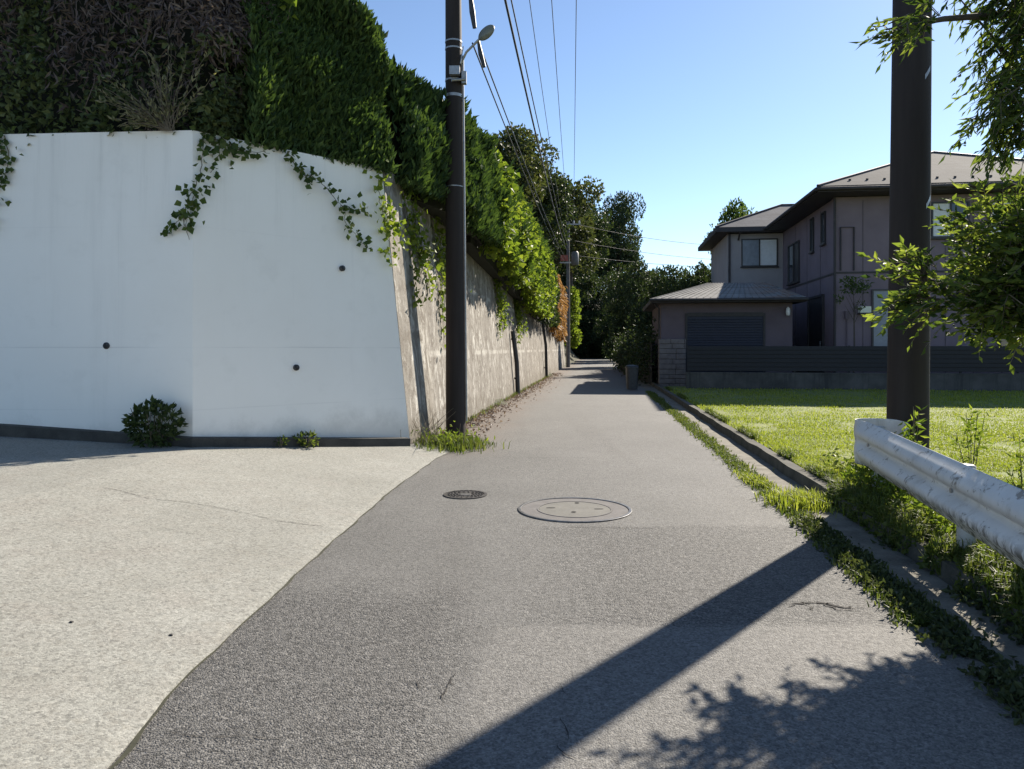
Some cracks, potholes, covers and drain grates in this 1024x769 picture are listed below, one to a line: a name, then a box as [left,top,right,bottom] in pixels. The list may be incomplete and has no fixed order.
manhole cover [443,490,487,499]
manhole cover [518,497,632,523]
crack [789,601,864,611]
